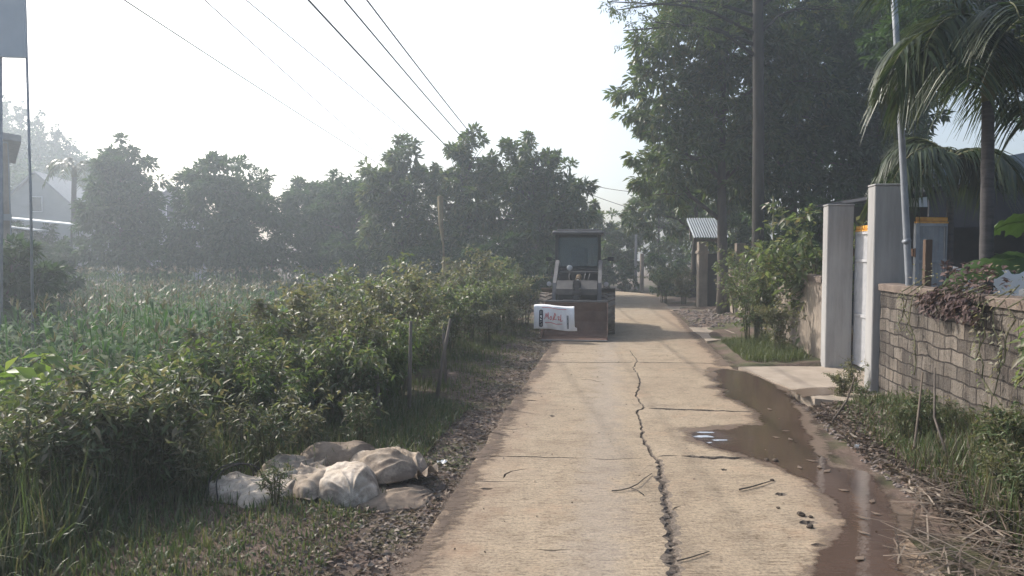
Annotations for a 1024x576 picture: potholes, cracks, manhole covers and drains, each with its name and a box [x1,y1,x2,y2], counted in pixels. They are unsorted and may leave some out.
crack [565,351,750,576]
